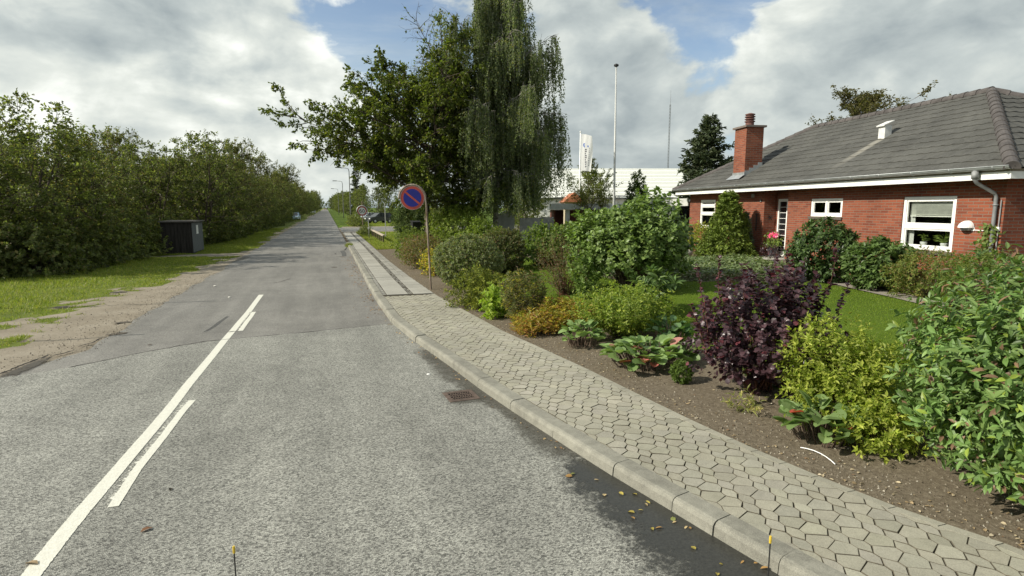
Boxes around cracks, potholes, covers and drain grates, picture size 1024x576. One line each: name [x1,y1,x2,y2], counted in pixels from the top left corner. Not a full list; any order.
drain grate [443,389,480,403]
